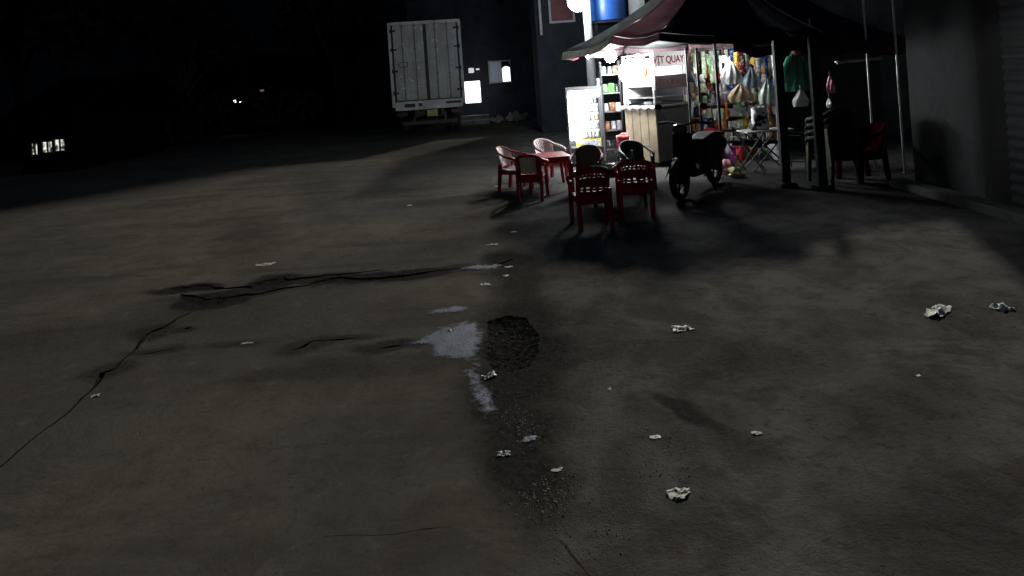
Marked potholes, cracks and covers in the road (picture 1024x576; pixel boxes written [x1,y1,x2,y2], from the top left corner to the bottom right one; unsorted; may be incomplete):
crack [552,537,590,576]
pothole [485,316,540,373]
crack [324,526,451,537]
crack [0,258,514,467]
